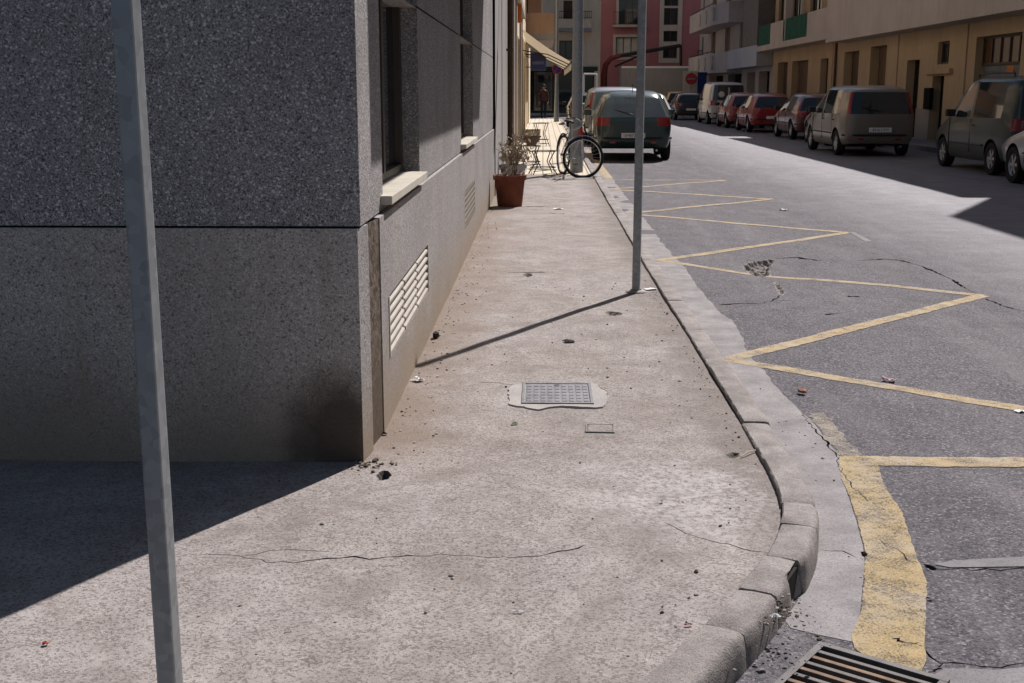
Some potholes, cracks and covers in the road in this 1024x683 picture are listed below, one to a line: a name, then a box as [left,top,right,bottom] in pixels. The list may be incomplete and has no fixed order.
pothole [742,259,775,277]
crack [195,545,584,563]
manhole cover [507,382,608,411]
crack [666,523,760,552]
crack [777,257,1021,311]
crack [897,639,1023,673]
drain grate [774,641,950,683]
manhole cover [585,423,615,433]
pothole [376,470,392,480]
